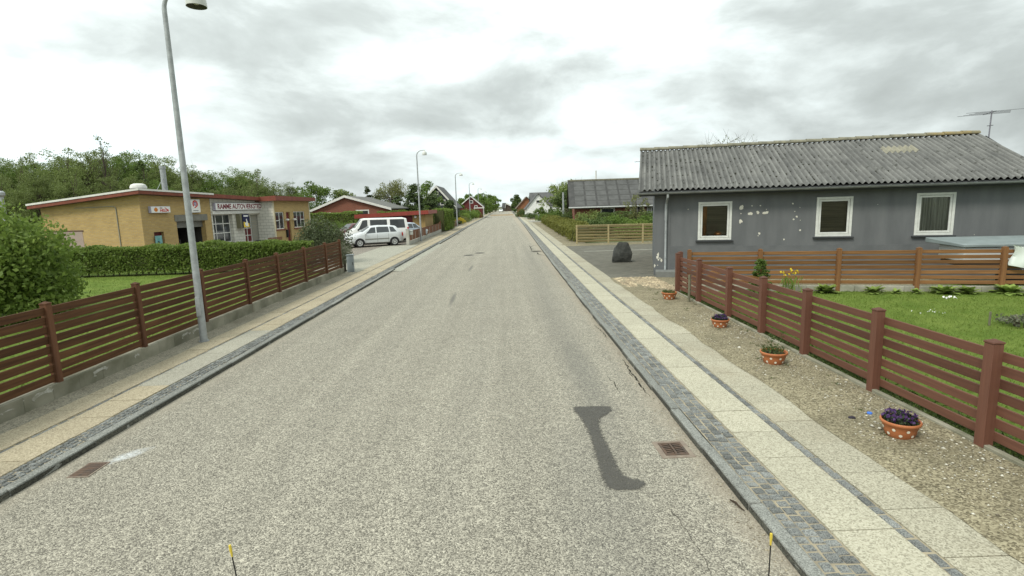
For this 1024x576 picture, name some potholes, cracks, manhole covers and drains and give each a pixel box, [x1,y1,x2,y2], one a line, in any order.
crack [607,360,649,395]
drain grate [652,440,696,459]
